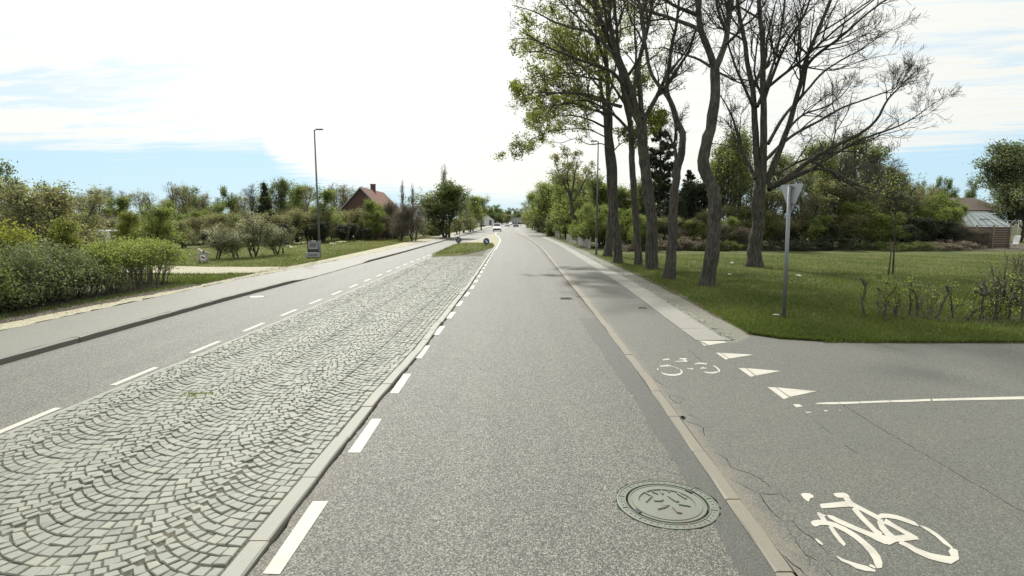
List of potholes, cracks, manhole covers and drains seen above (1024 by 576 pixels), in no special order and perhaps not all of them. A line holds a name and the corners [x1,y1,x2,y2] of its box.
manhole cover [616,480,721,530]
crack [687,421,833,576]
